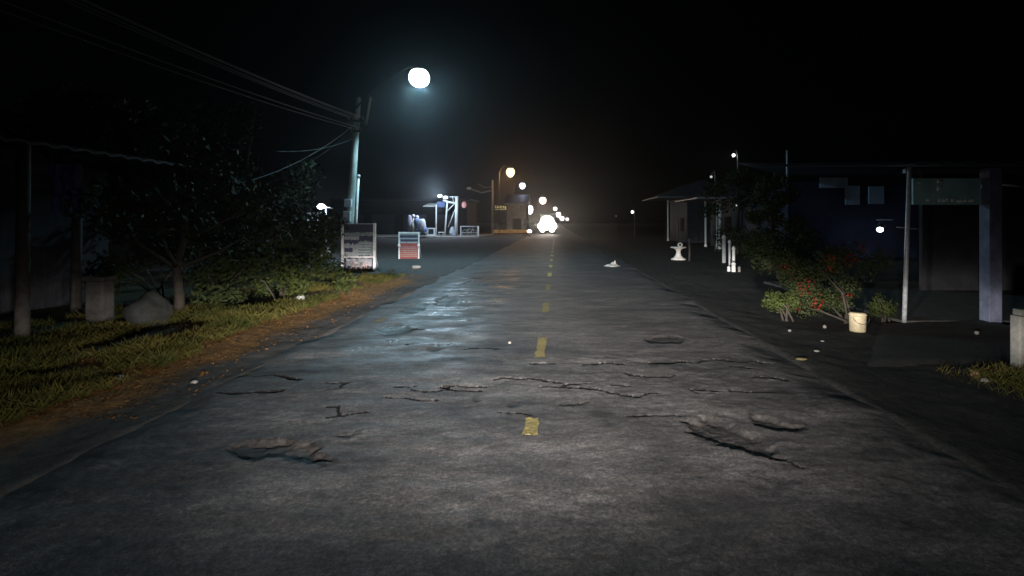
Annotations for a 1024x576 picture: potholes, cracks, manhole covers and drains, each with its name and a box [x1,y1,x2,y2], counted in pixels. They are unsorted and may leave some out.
pothole [745,409,809,433]
crack [324,406,368,419]
pothole [643,334,687,344]
pothole [219,435,341,467]
crack [385,359,807,417]
pothole [679,414,789,462]
crack [216,374,302,395]
